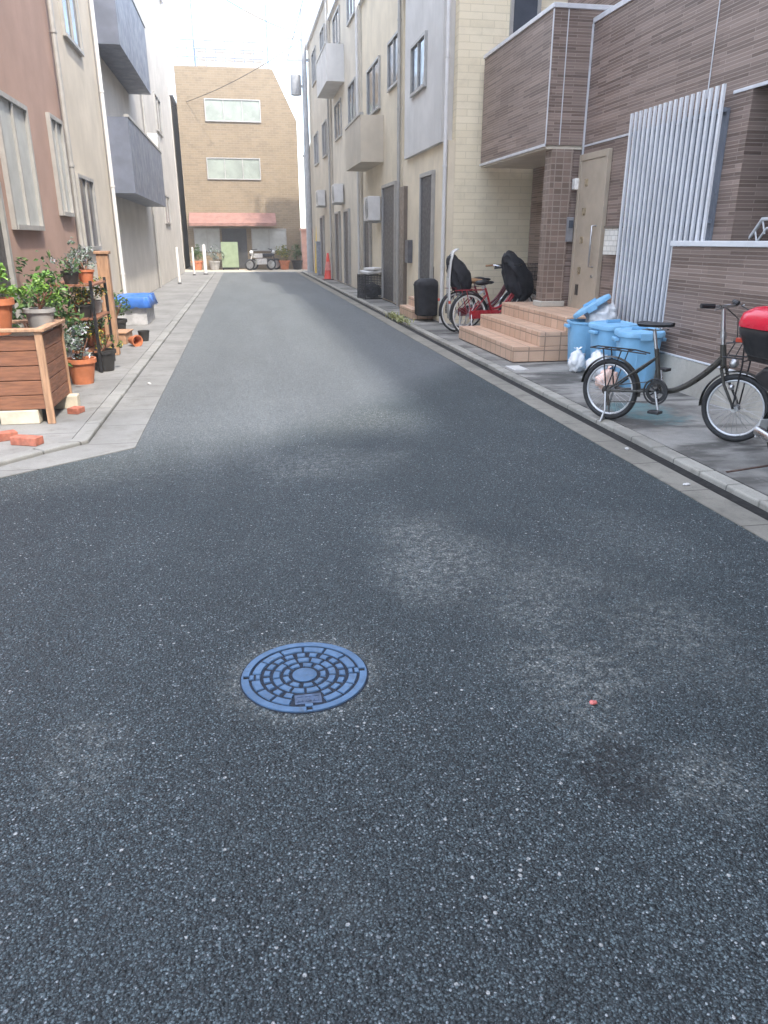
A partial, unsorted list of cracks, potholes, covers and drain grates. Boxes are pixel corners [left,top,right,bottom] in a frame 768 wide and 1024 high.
manhole cover [240,642,369,714]
